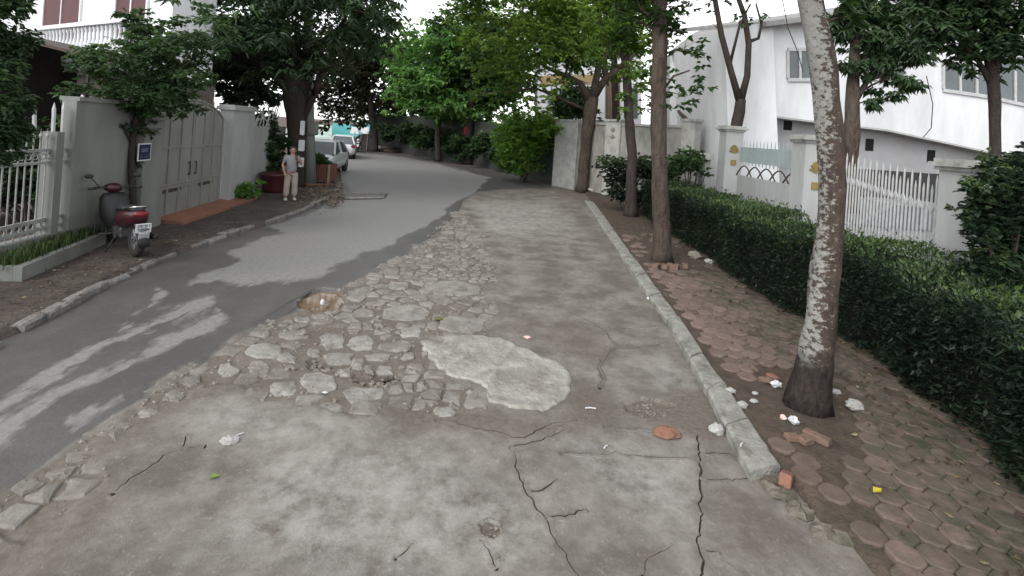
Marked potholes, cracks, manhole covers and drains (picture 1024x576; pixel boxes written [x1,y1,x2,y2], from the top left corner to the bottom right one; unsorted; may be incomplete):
pothole [293,287,350,315]
pothole [477,517,504,540]
pothole [618,396,679,419]
